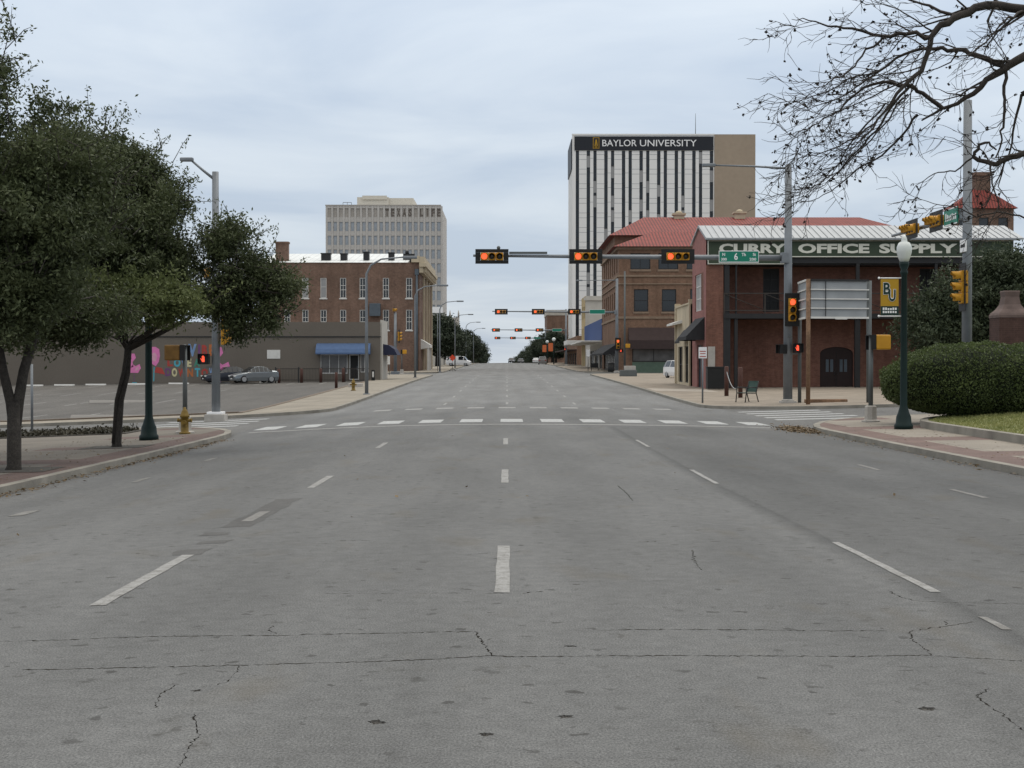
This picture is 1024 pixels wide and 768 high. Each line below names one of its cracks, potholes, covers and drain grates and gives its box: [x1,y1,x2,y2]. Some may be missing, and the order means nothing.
crack [178,715,201,768]
crack [976,689,1022,730]
crack [25,621,1012,685]
